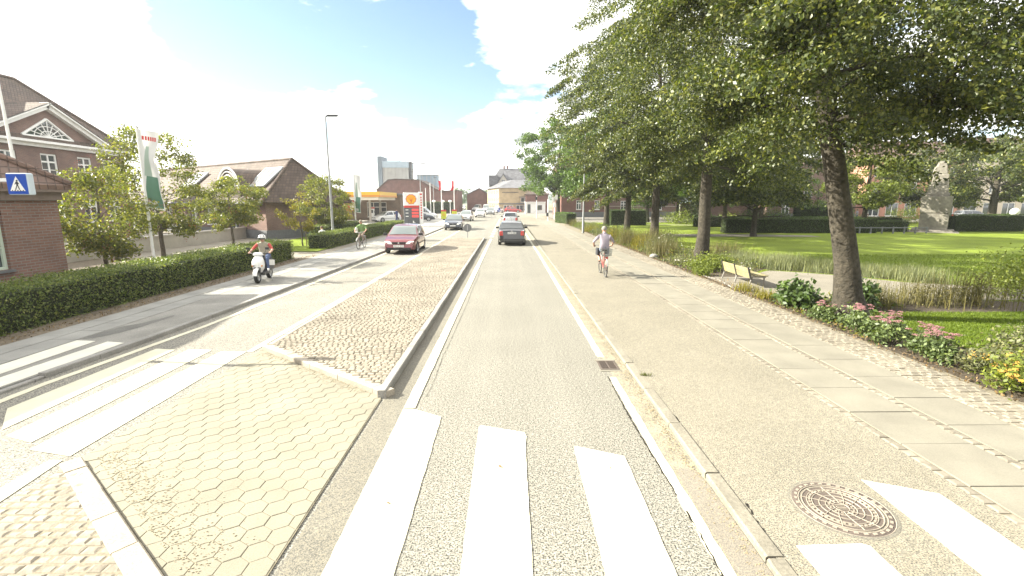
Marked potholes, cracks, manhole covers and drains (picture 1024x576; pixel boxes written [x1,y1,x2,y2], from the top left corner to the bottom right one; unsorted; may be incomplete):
drain grate [594,359,621,371]
manhole cover [788,480,901,540]
